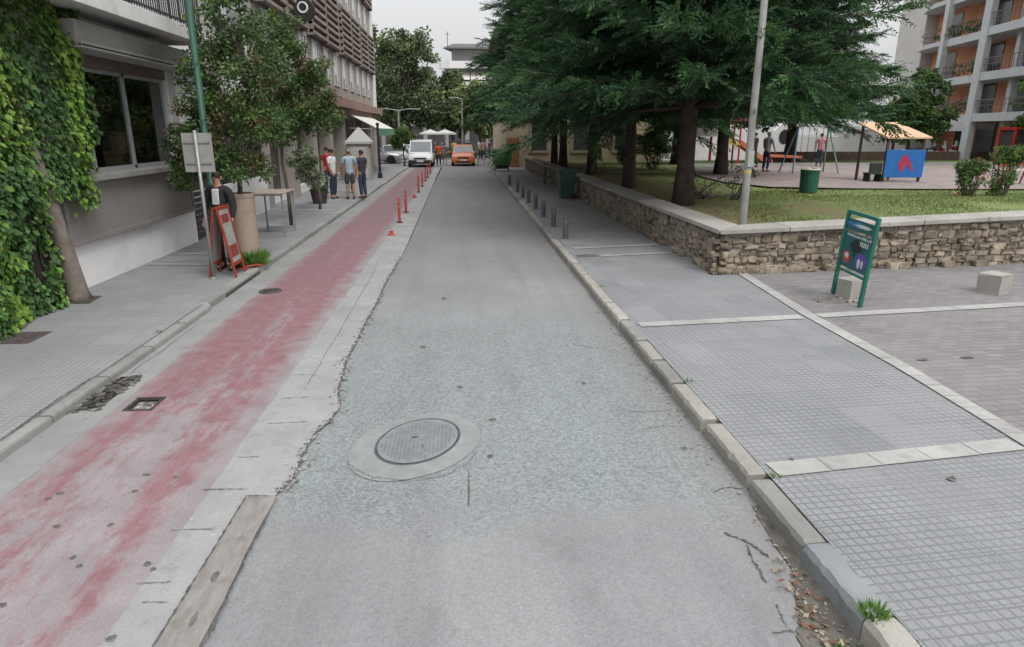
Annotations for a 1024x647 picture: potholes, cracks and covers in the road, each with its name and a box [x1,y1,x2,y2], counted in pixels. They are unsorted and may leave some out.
manhole cover [347,413,480,481]
manhole cover [122,396,166,411]
crack [725,532,769,582]
crack [348,450,477,506]
